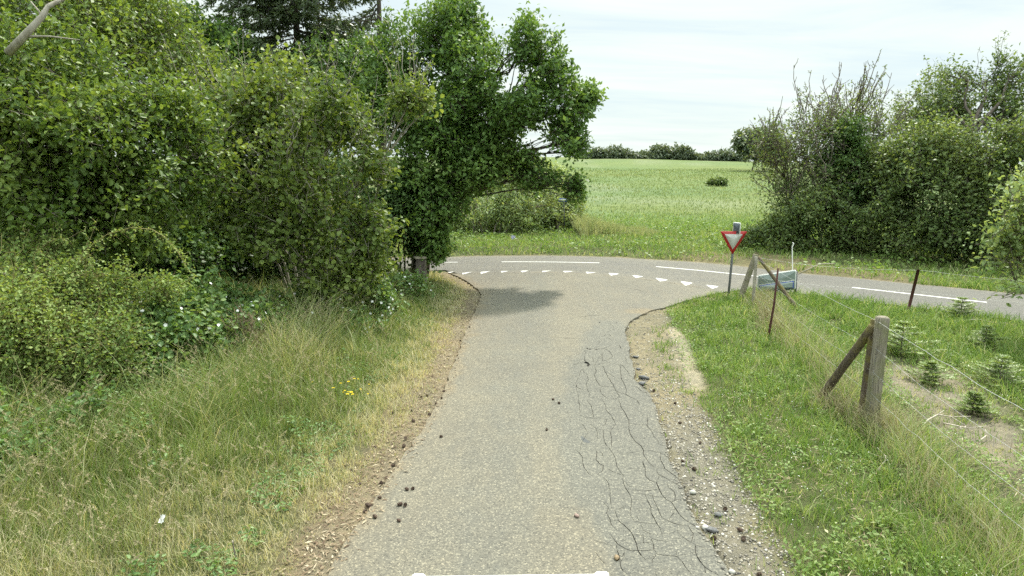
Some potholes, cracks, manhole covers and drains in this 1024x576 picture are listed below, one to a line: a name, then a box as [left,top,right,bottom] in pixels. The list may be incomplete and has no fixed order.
crack [571,325,718,576]
